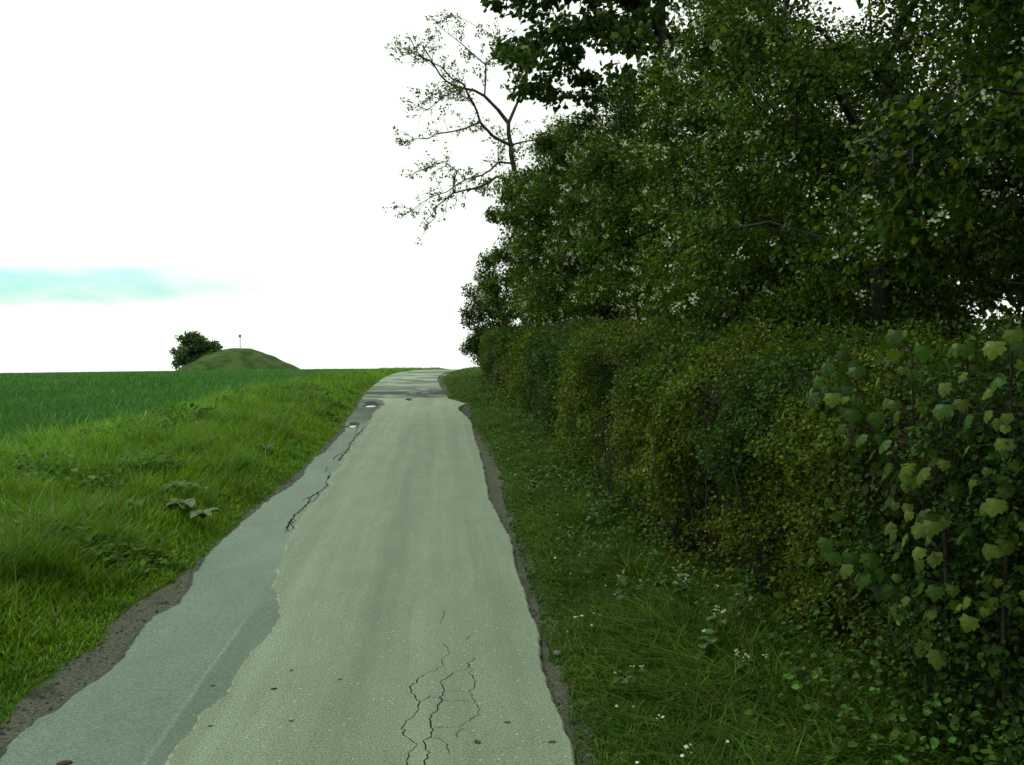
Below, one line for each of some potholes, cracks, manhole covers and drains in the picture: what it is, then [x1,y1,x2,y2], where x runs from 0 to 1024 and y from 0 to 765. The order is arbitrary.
crack [400,609,481,765]
crack [285,428,363,532]
